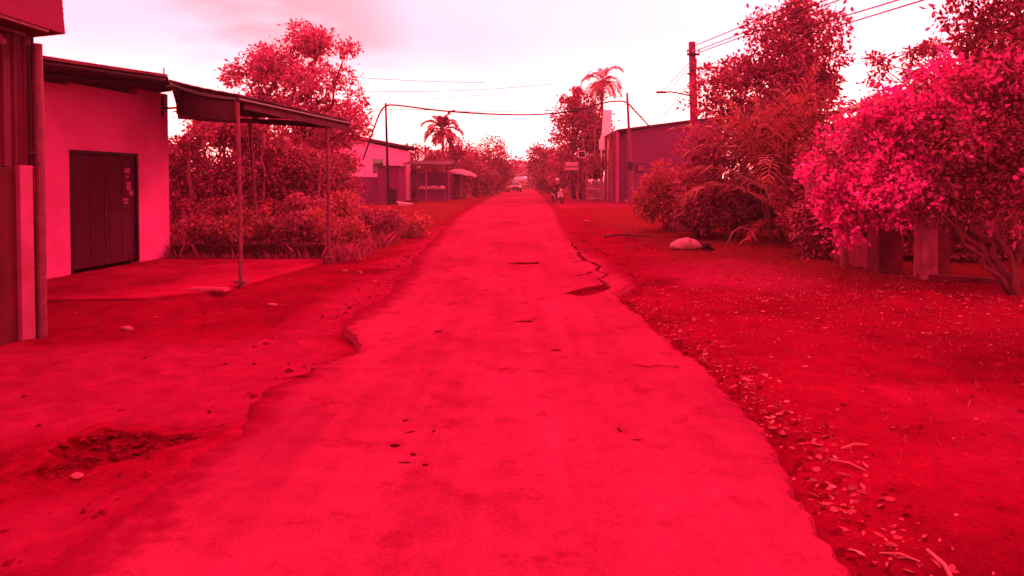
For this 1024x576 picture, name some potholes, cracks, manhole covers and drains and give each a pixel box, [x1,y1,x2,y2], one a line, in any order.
crack [565,238,611,284]
pothole [563,284,614,297]
